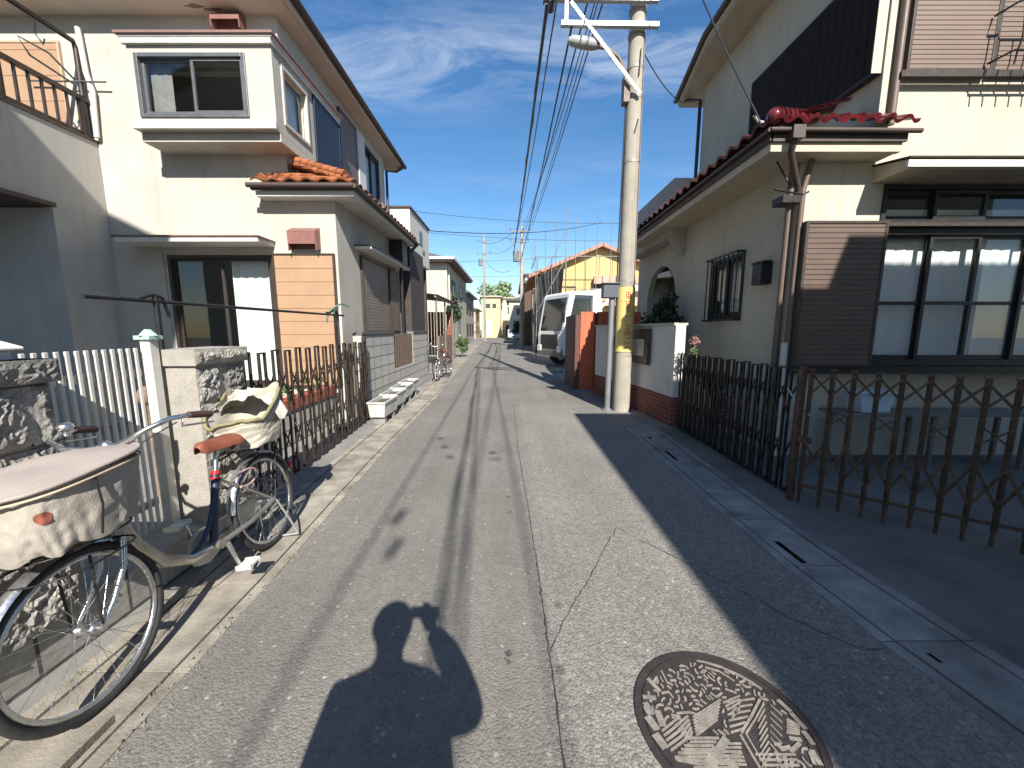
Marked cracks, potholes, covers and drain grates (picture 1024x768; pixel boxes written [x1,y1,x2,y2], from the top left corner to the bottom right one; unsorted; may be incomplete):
manhole cover [634,651,834,768]
crack [514,414,888,768]
